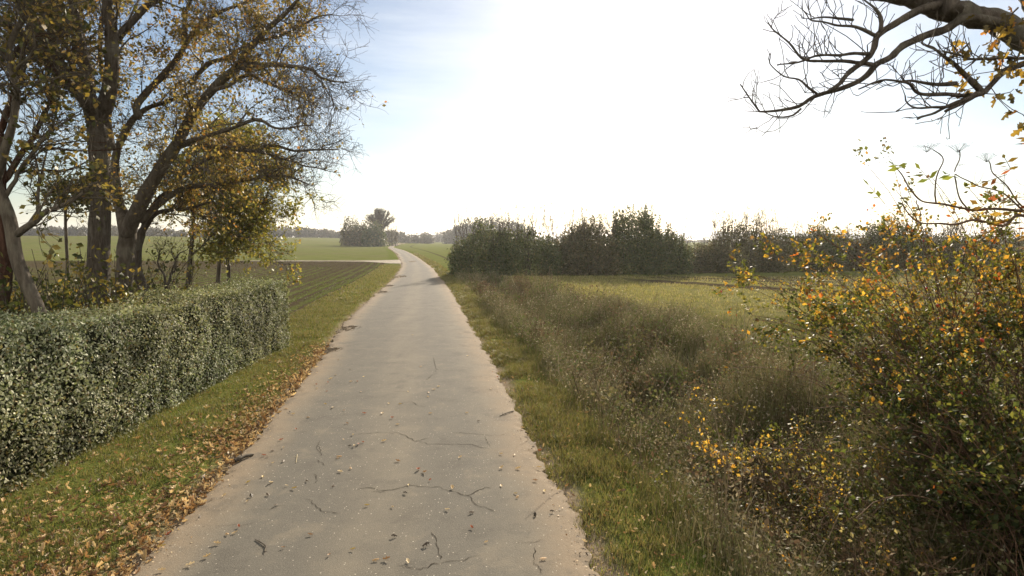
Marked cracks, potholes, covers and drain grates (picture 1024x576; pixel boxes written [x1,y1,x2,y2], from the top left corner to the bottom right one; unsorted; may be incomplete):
crack [307,428,504,513]
